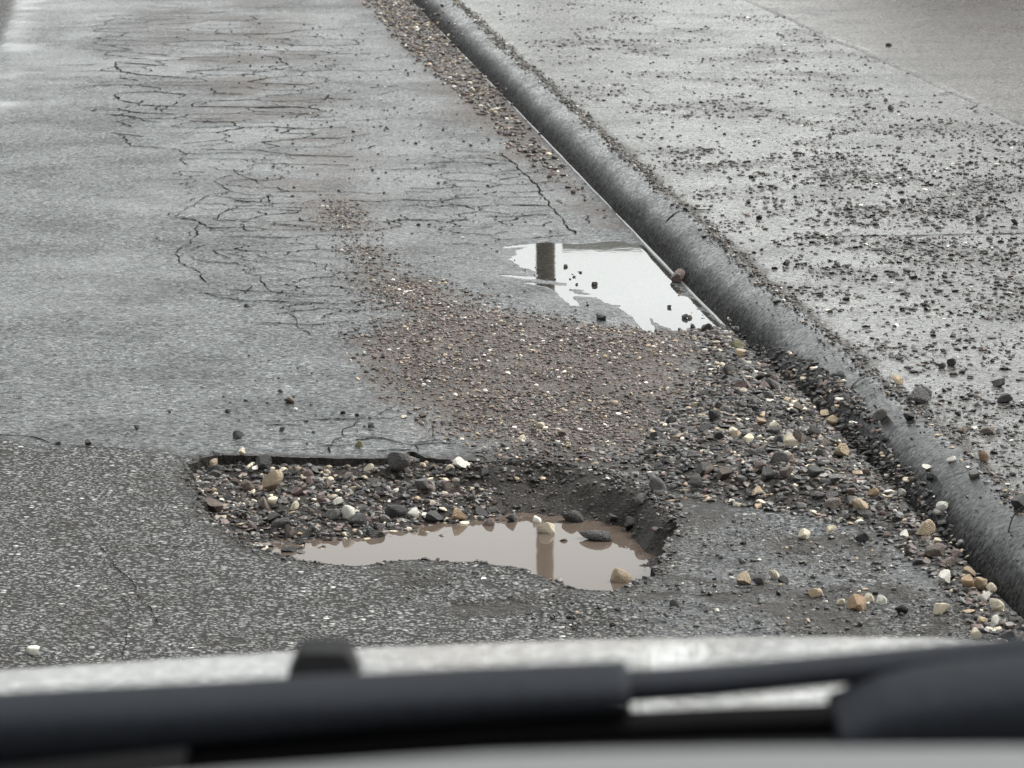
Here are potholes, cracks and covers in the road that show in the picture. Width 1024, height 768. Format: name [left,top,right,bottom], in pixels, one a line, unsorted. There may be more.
crack [67,7,416,334]
crack [99,545,185,660]
pothole [187,451,678,577]
crack [213,397,491,454]
